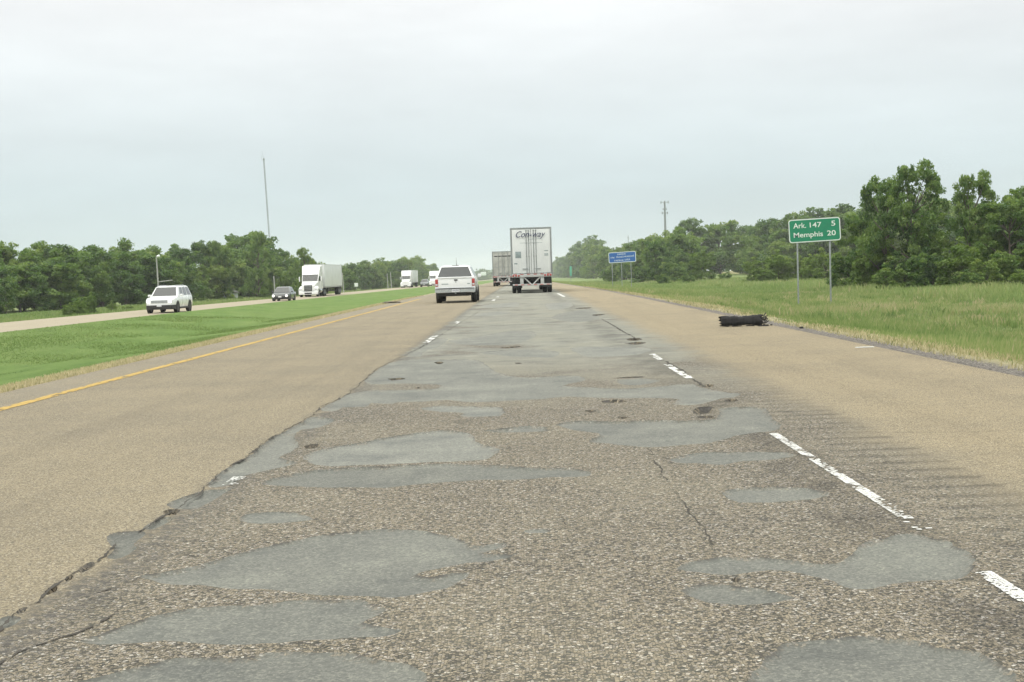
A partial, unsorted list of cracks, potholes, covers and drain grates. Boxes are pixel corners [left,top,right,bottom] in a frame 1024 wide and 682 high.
crack [648,449,715,551]
crack [0,312,478,631]
